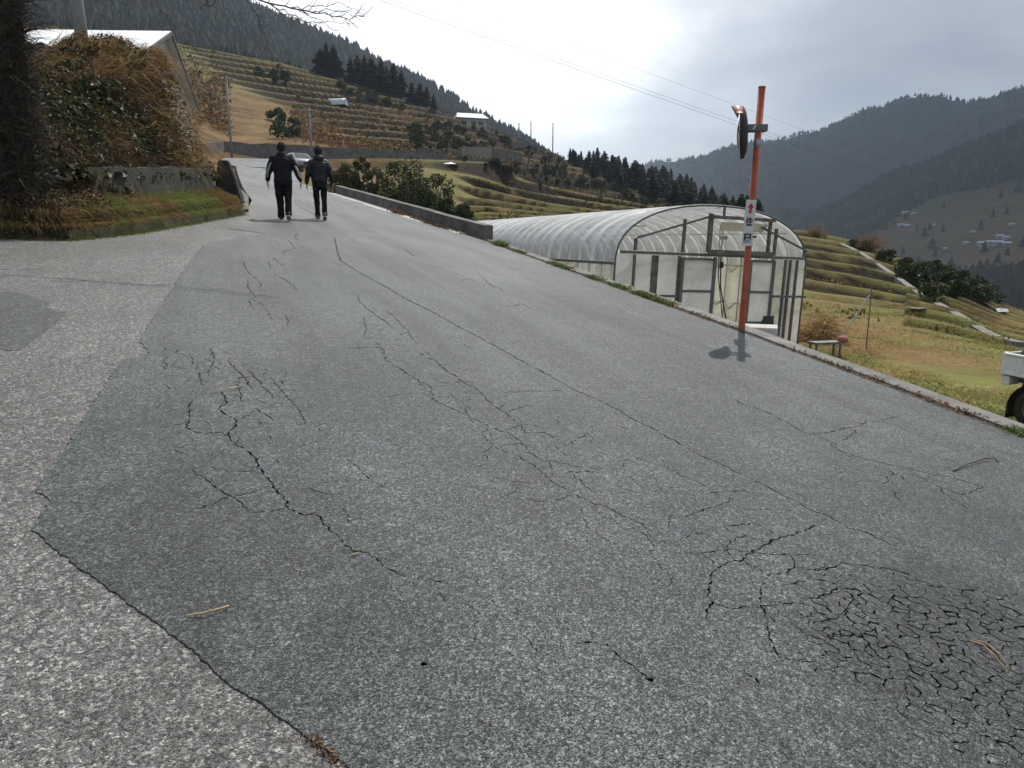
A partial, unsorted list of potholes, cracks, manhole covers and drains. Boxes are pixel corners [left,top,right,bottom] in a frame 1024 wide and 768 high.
crack [875,466,983,506]
crack [702,523,1024,767]
crack [158,349,396,573]
crack [335,241,883,587]
crack [738,401,941,476]
crack [243,233,299,325]
